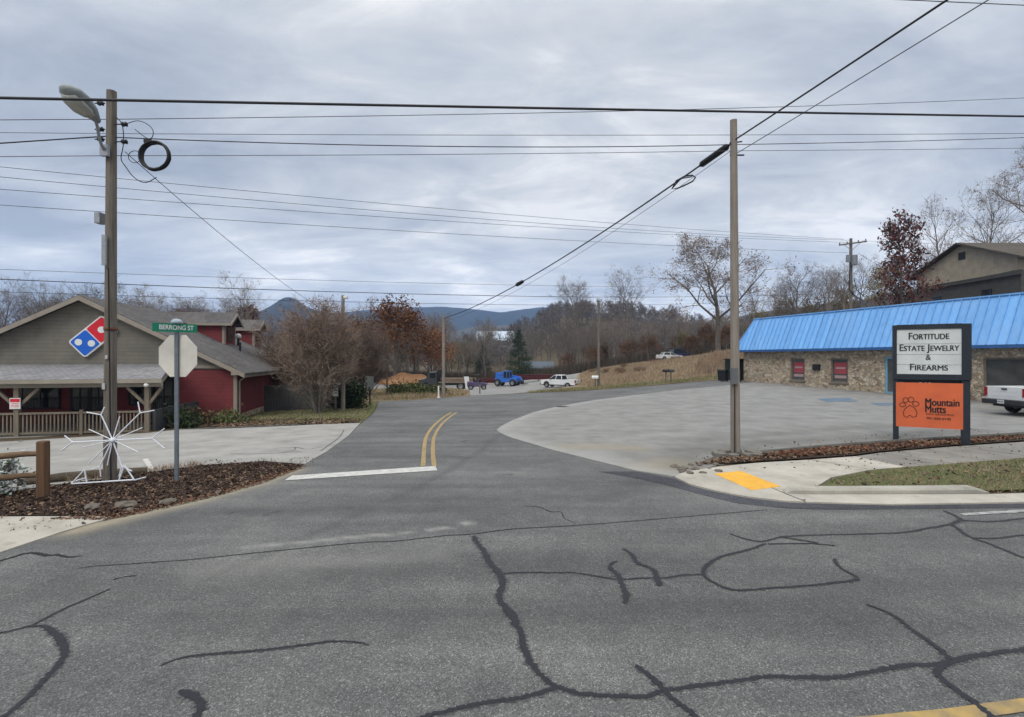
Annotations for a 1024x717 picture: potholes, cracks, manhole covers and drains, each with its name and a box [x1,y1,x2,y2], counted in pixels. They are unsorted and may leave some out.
crack [0,552,82,561]
crack [731,510,1024,558]
